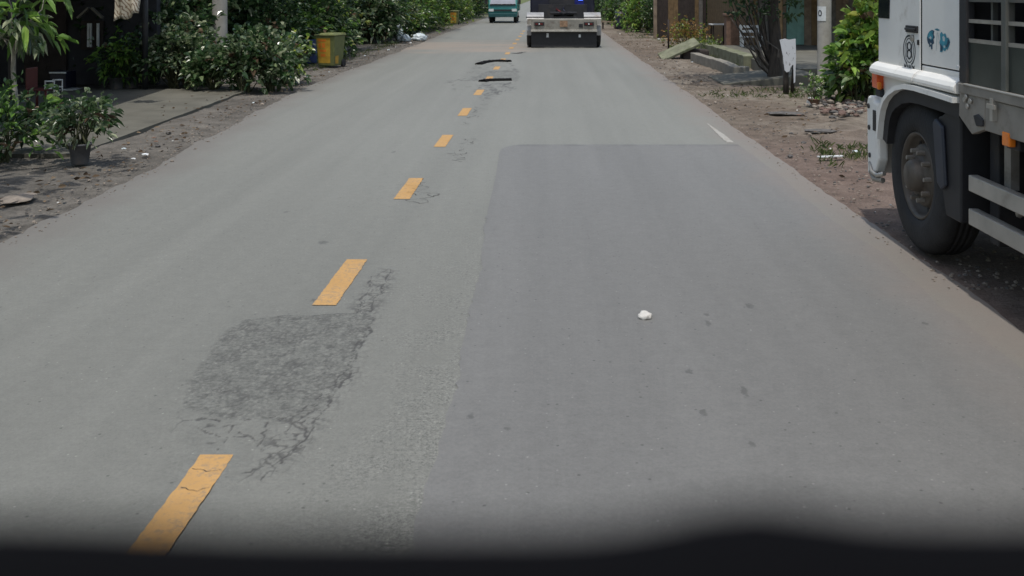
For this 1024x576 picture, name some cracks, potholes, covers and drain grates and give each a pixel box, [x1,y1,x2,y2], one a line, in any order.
crack [157,266,407,491]
crack [439,52,525,162]
